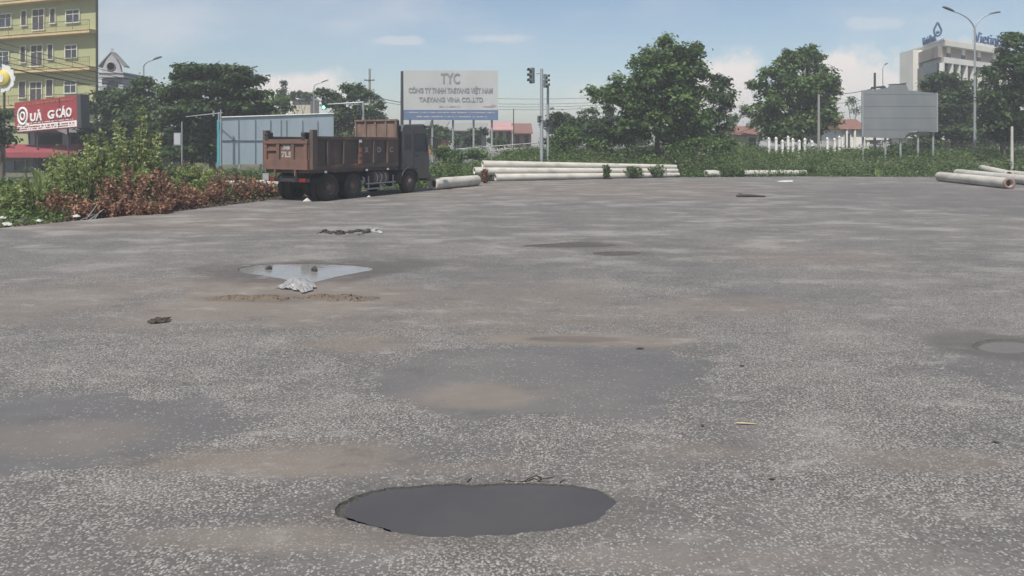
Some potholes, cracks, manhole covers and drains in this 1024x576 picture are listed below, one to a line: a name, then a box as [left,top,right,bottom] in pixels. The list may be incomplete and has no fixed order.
pothole [335,483,616,532]
